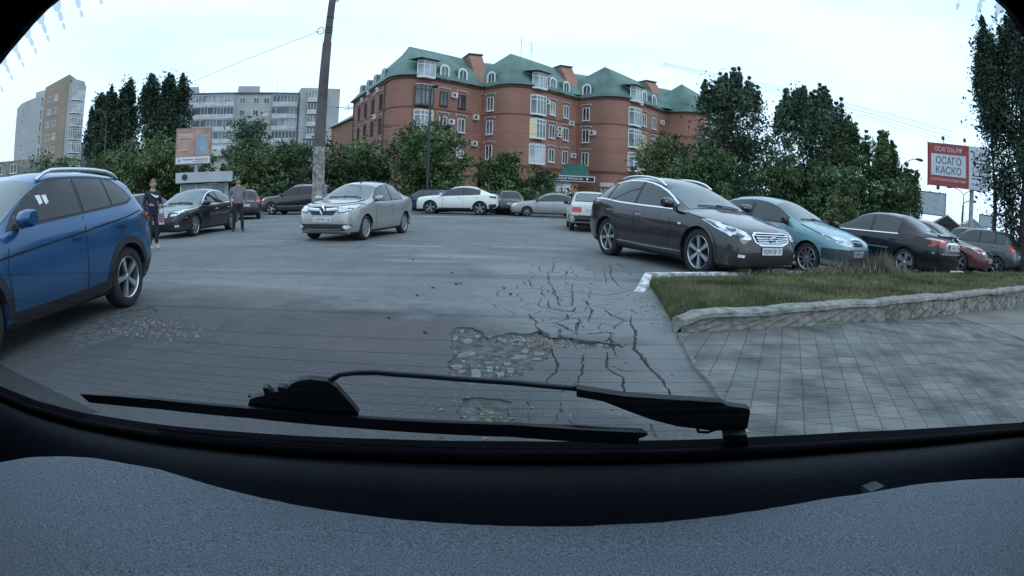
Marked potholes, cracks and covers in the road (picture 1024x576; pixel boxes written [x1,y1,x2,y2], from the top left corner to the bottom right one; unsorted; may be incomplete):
pothole [456,397,511,422]
crack [491,258,671,440]
pothole [447,327,622,386]
